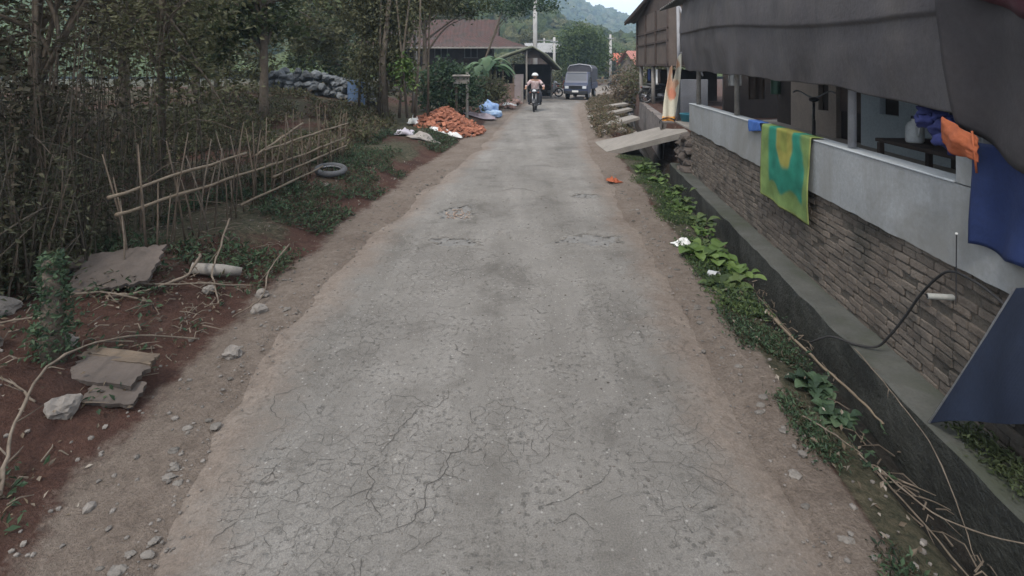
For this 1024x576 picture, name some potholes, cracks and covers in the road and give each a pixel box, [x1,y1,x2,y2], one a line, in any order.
pothole [417,236,484,247]
crack [604,396,739,541]
pothole [431,203,480,221]
crack [219,378,577,576]
pothole [547,233,625,247]
crack [540,468,611,529]
